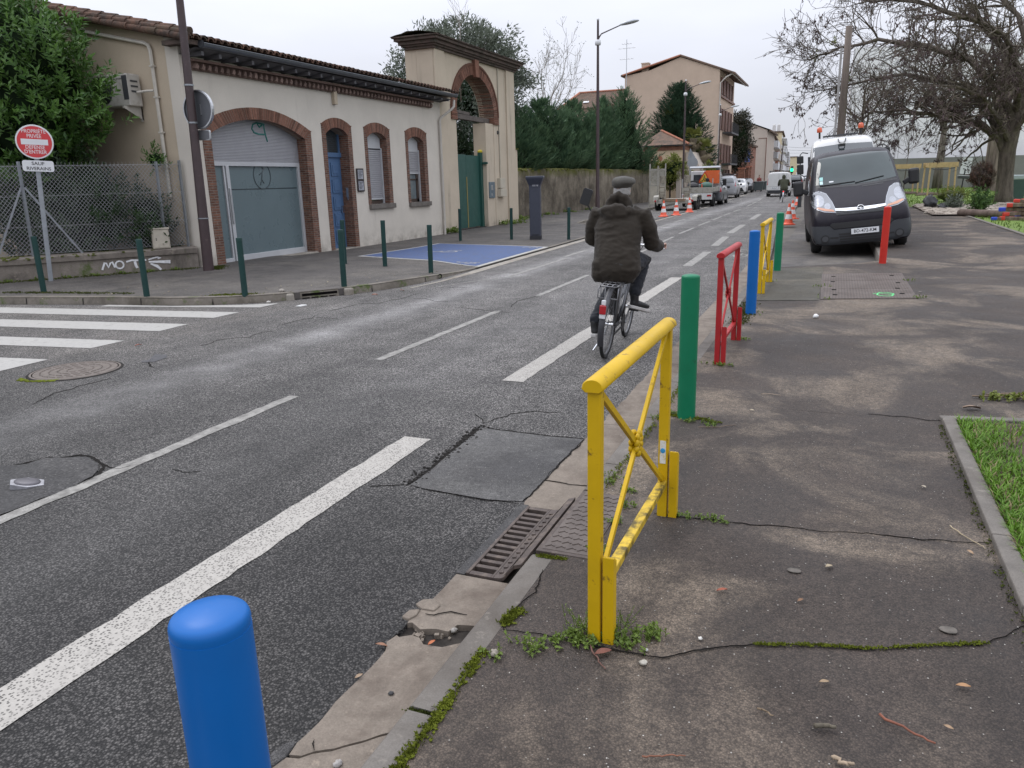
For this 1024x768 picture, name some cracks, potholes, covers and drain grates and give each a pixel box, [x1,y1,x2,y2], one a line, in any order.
drain grate [456,497,575,582]
drain grate [286,286,354,301]
manhole cover [26,360,124,381]
crack [503,569,1024,658]
utility cover [10,477,44,490]
manhole cover [536,491,628,559]
crack [377,411,583,486]
pothole [399,628,470,647]
manhole cover [820,273,918,300]
crack [654,513,991,544]
